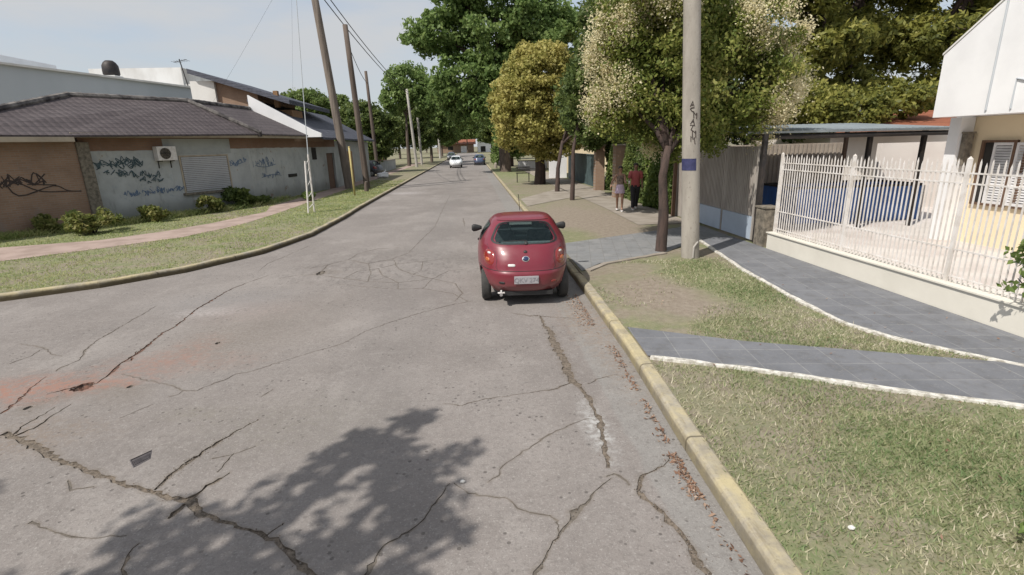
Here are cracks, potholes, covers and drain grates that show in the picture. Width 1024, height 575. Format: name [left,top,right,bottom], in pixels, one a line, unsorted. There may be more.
crack [0,196,467,575]
pothole [69,382,96,392]
crack [364,418,712,575]
